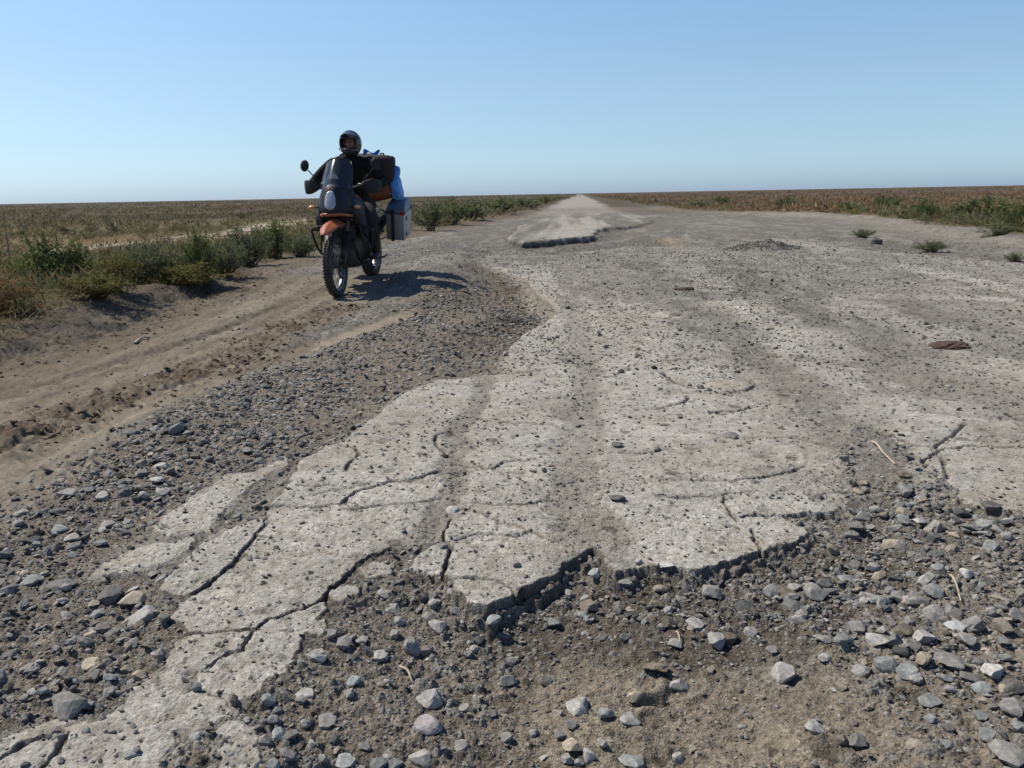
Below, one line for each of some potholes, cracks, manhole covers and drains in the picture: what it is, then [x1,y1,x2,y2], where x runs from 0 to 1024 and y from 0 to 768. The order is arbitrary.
pothole [510,226,641,255]
crack [0,185,1024,768]
pothole [429,263,552,352]
pothole [164,485,1024,768]
